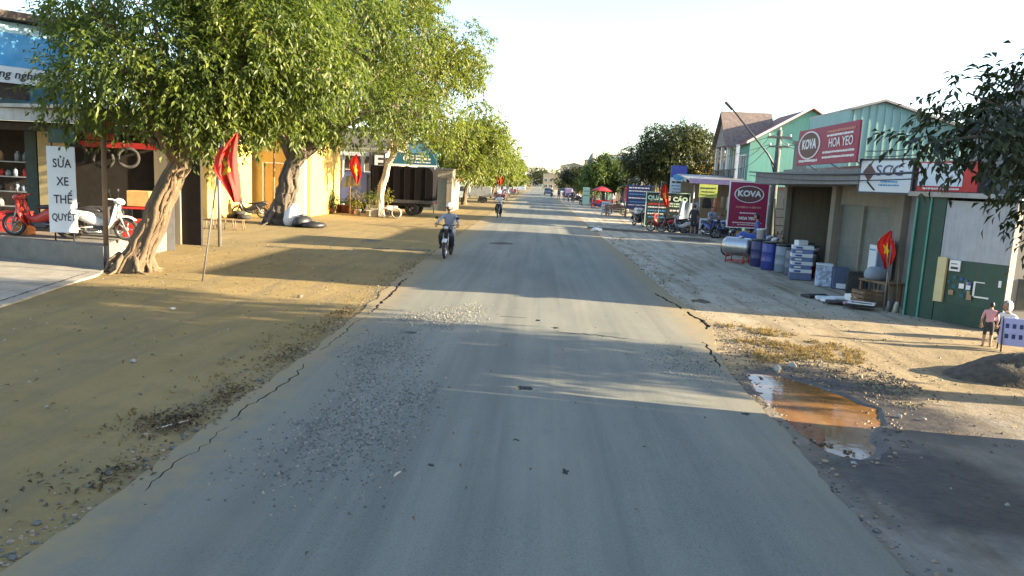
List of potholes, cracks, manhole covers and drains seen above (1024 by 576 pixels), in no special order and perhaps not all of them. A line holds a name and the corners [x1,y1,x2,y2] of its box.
crack [655,293,721,366]
crack [322,278,406,349]
crack [144,364,304,492]
pothole [742,370,889,460]
